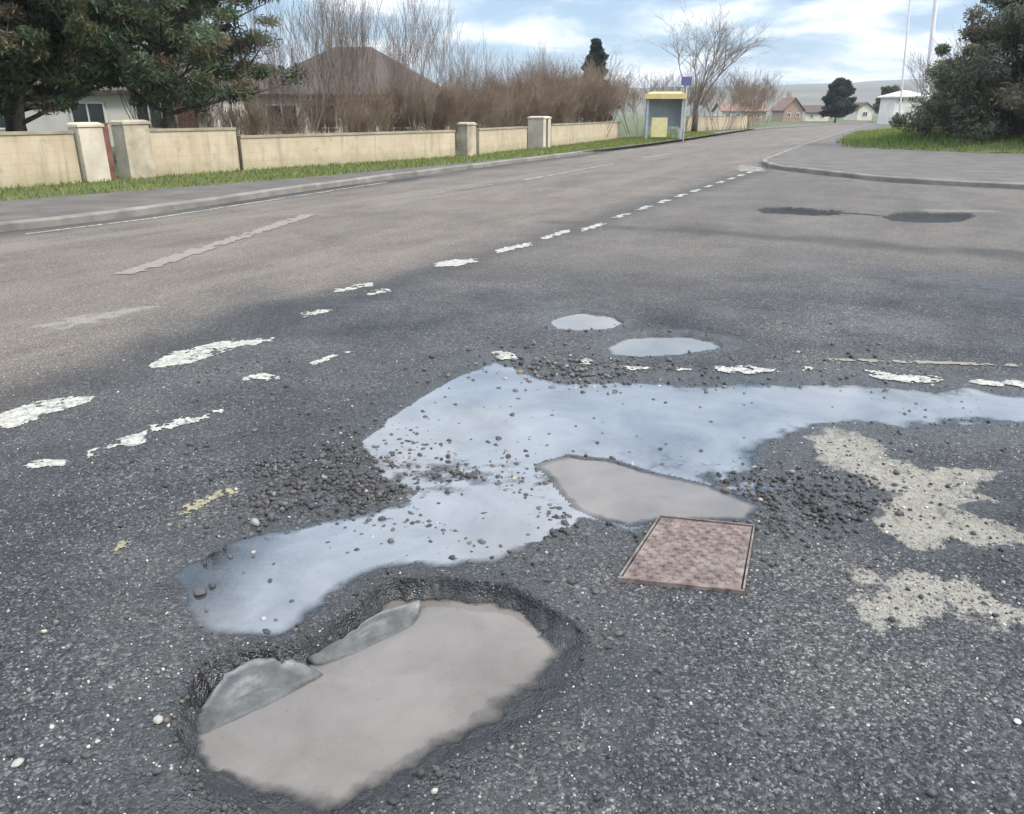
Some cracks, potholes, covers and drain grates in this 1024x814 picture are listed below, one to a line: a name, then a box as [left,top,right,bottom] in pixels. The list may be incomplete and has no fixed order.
pothole [176,577,589,814]
pothole [604,333,724,357]
pothole [535,455,766,527]
manhole cover [617,515,755,595]
pothole [549,310,624,331]
